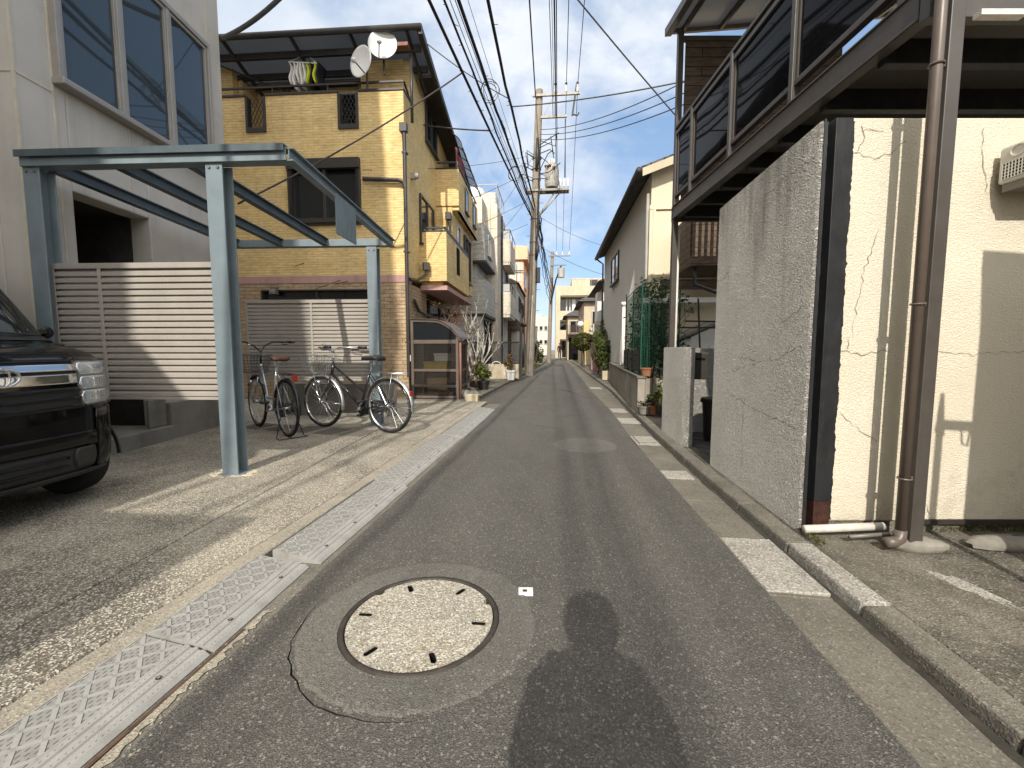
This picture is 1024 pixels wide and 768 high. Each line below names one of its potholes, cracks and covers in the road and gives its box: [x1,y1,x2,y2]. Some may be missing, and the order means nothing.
manhole cover [337,576,499,678]
